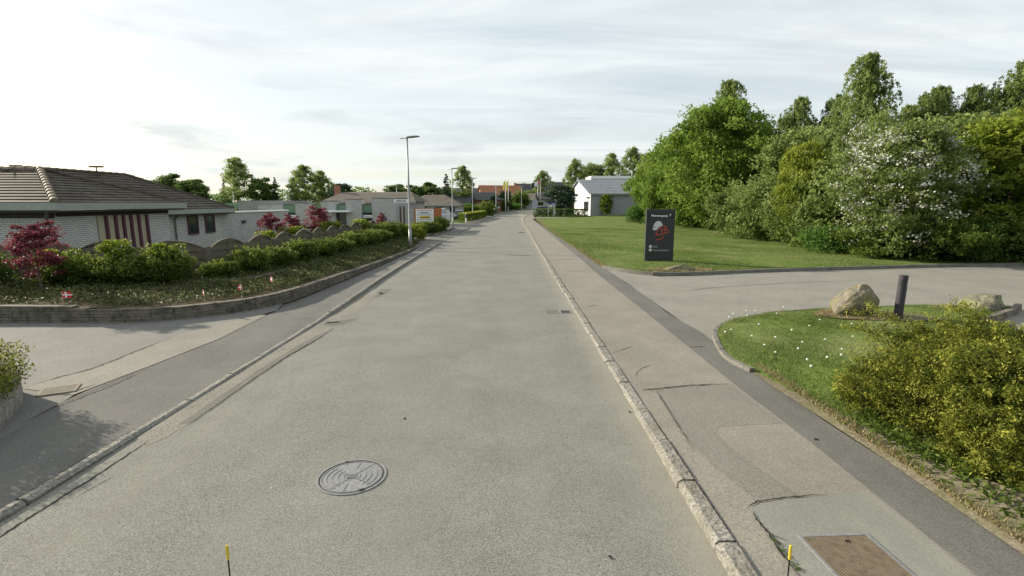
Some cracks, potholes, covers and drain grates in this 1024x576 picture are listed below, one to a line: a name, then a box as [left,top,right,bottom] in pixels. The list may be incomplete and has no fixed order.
manhole cover [316,459,387,496]
crack [636,365,825,576]
utility cover [35,383,82,397]
